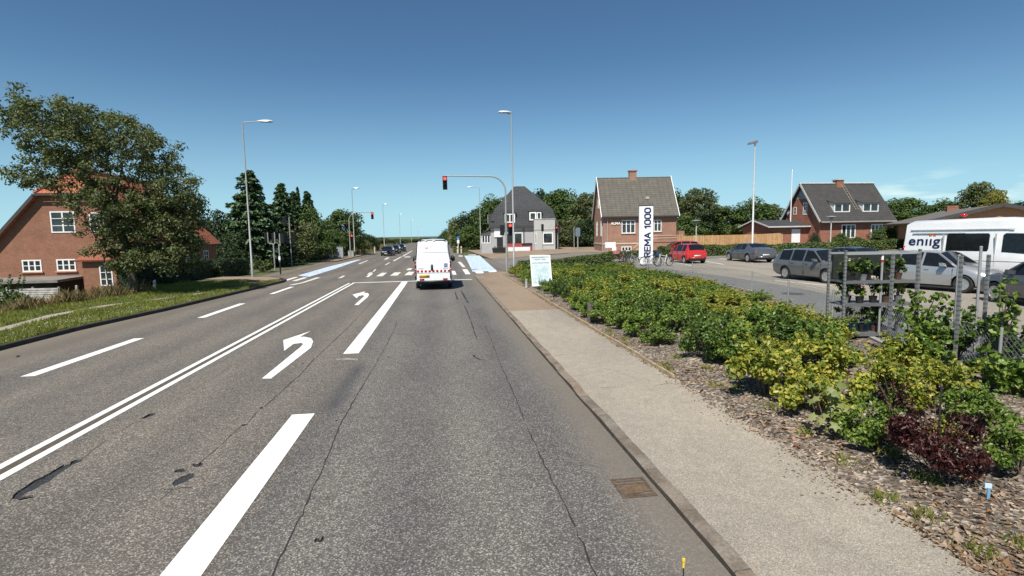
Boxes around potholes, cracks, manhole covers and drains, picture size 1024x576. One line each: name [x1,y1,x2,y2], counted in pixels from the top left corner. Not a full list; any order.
crack [455,291,478,340]
pothole [10,459,82,501]
pothole [172,473,195,486]
